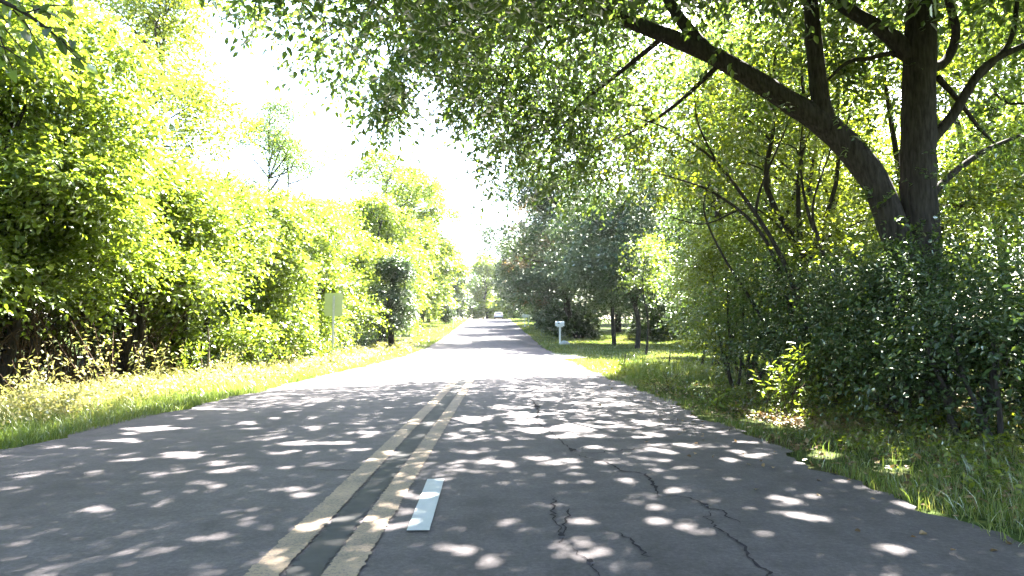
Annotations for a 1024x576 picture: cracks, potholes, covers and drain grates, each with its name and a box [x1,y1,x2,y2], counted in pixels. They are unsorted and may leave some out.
crack [533,401,773,576]
